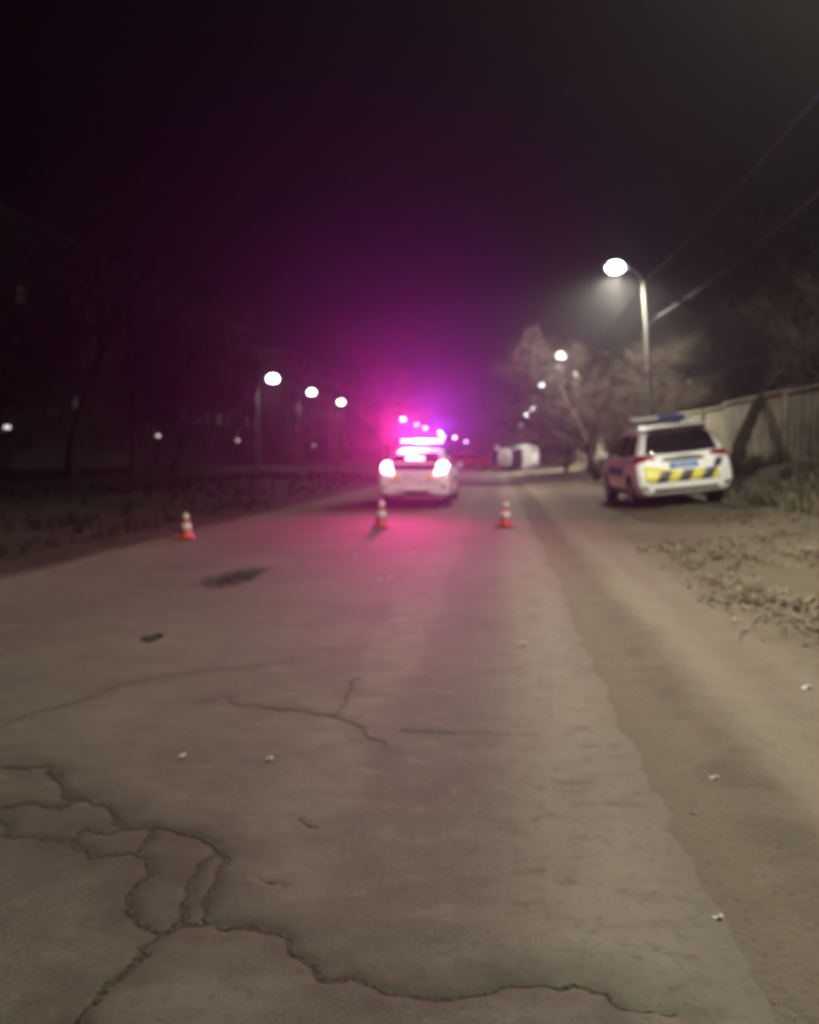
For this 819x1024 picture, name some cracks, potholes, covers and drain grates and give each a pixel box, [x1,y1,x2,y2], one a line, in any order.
pothole [140,633,163,642]
pothole [199,568,265,588]
crack [206,678,511,747]
crack [0,764,678,1024]
